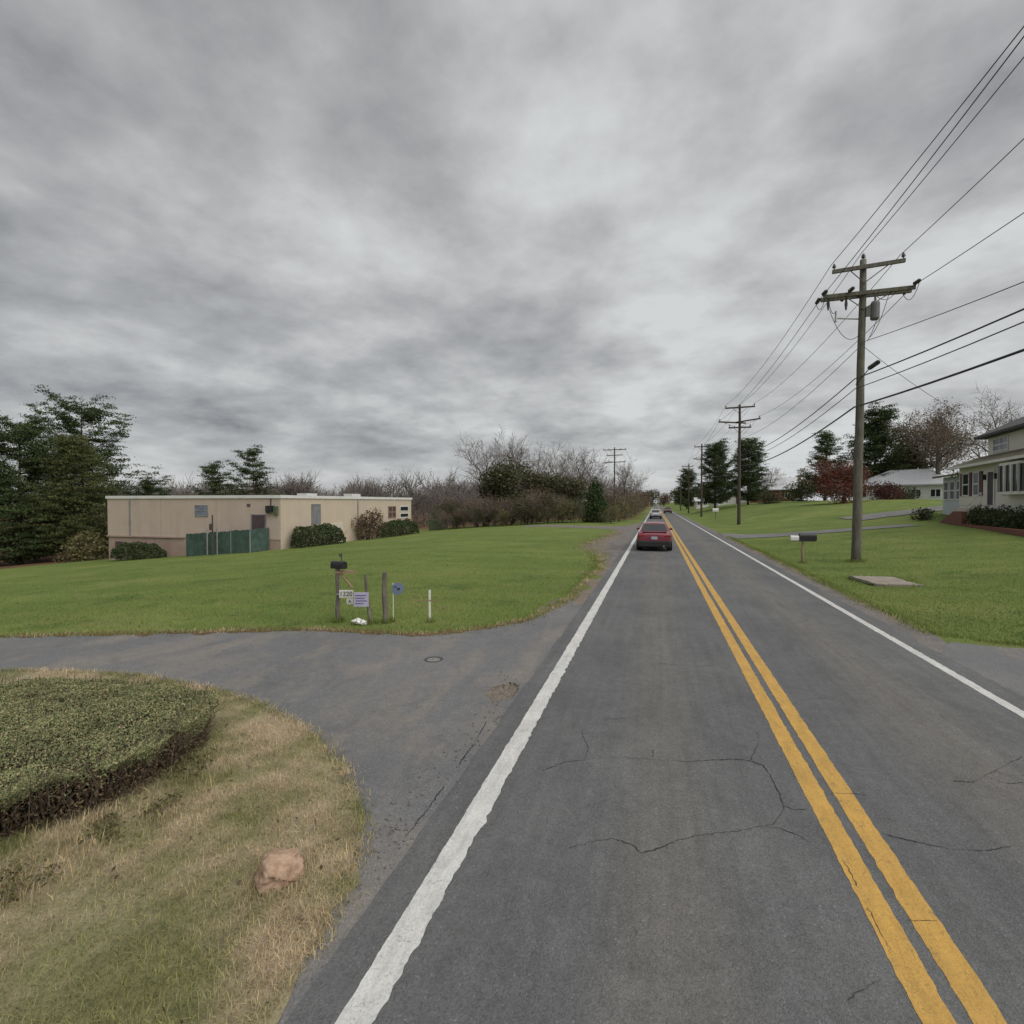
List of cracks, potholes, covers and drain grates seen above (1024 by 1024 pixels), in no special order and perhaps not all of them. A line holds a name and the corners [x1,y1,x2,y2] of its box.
crack [887,834,1010,851]
crack [542,732,809,853]
pothole [485,682,520,703]
